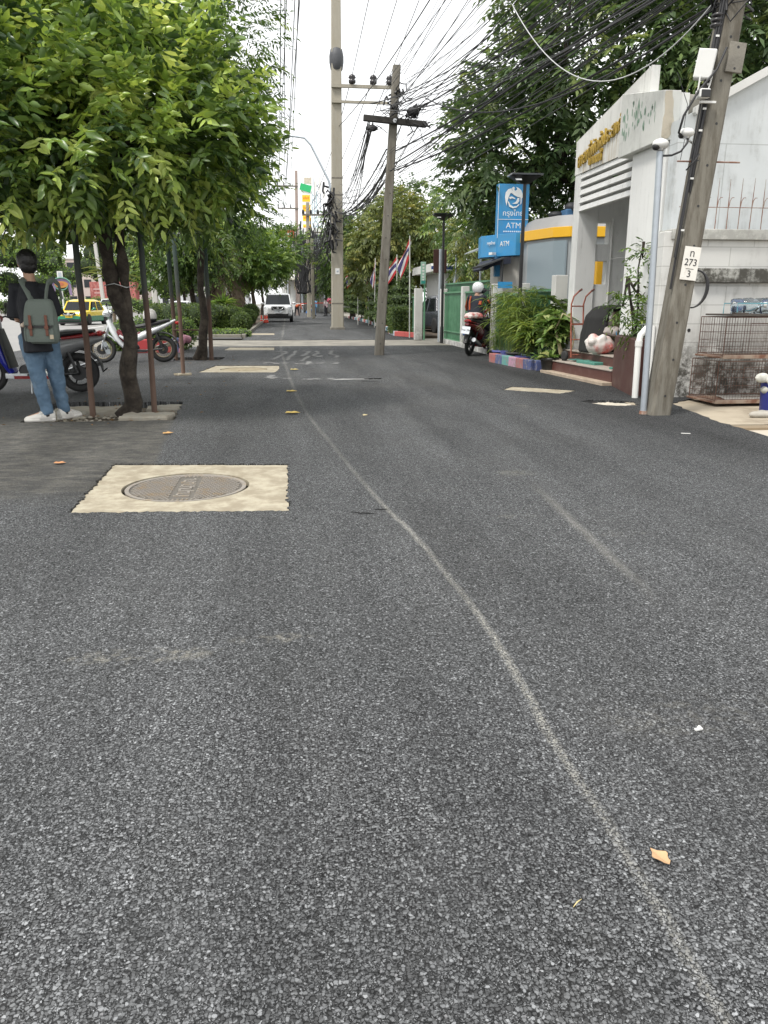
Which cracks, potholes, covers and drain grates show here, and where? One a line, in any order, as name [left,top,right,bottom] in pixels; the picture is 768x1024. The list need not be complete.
manhole cover [71,465,289,513]
